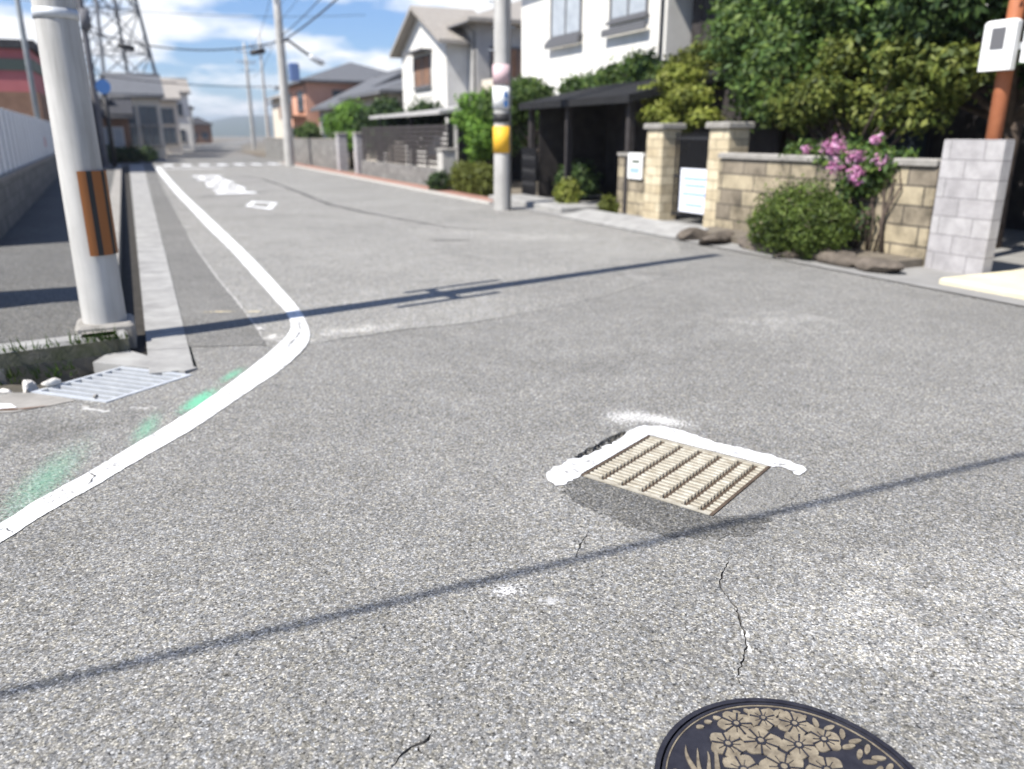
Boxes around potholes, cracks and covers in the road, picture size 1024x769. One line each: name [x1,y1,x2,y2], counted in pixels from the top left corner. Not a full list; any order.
crack [393,731,433,766]
drain grate [581,435,771,516]
manhole cover [654,698,915,769]
crack [719,555,752,696]
drain grate [31,366,192,403]
